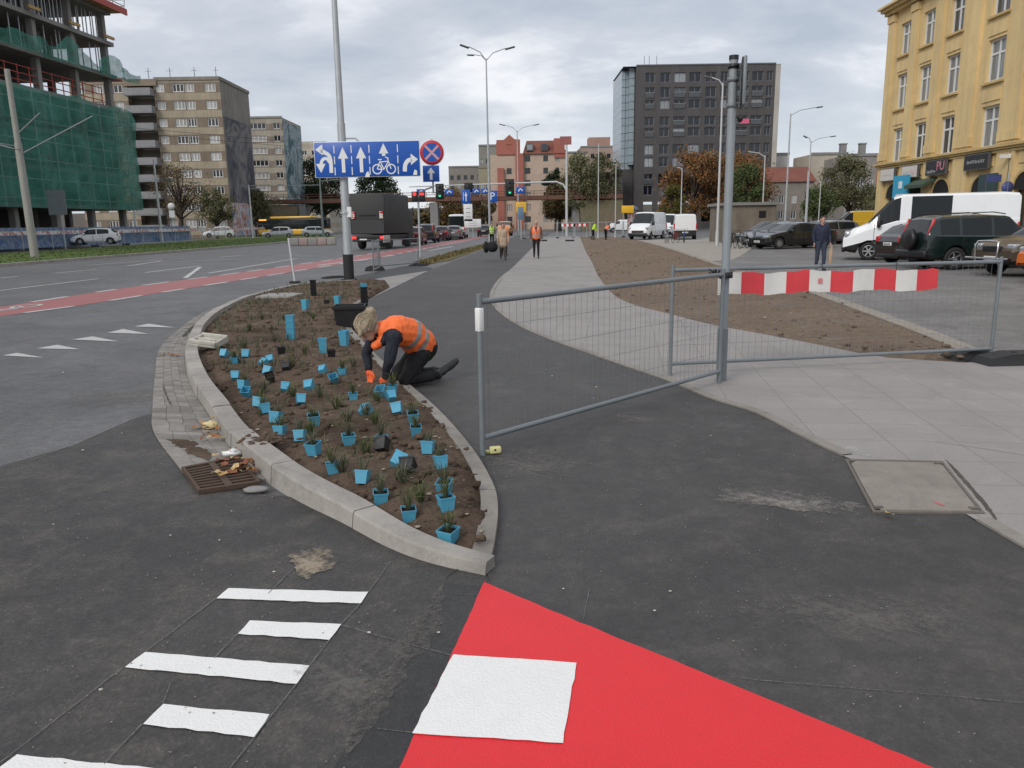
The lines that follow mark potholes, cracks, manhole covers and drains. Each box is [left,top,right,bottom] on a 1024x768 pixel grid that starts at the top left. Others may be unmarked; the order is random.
manhole cover [845,459,985,516]
drain grate [181,456,261,494]
